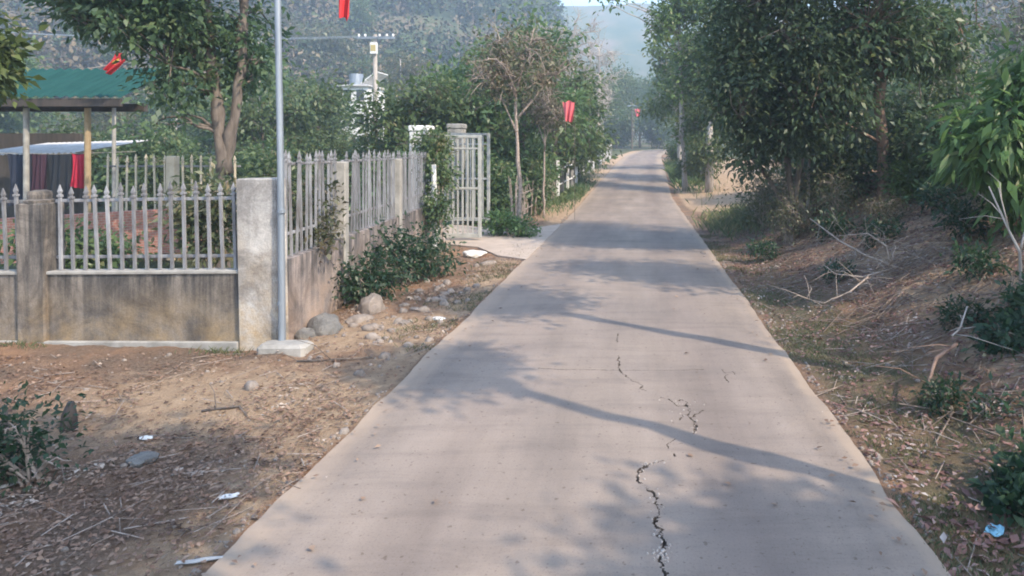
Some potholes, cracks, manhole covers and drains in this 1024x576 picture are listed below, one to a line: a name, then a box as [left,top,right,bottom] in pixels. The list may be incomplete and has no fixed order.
crack [541,333,705,576]
